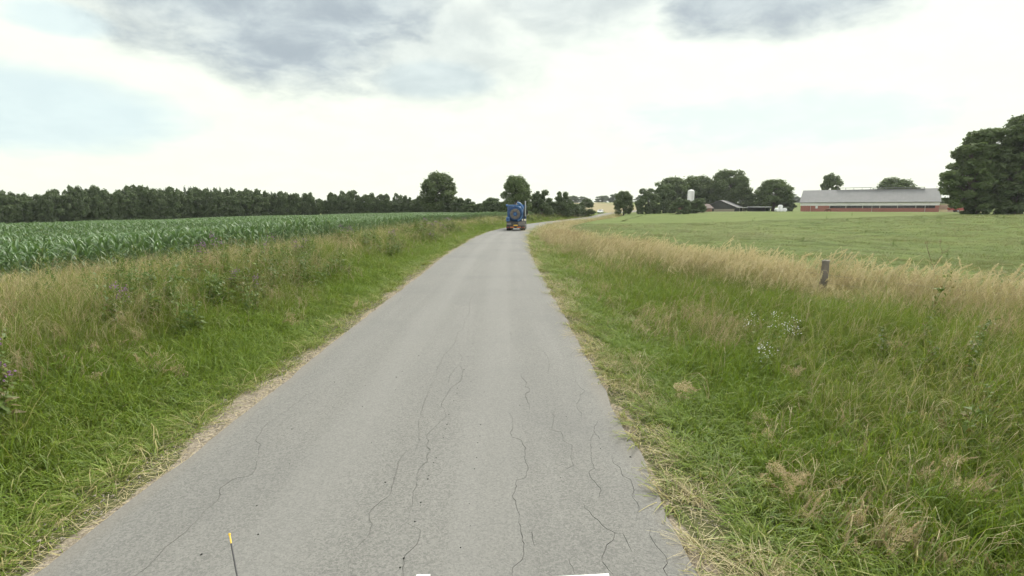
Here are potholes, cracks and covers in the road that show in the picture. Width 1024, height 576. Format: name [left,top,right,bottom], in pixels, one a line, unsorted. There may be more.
crack [510,419,535,571]
crack [136,396,305,575]
crack [348,294,474,576]
crack [584,506,631,576]
crack [551,378,601,494]
crack [613,458,668,575]
